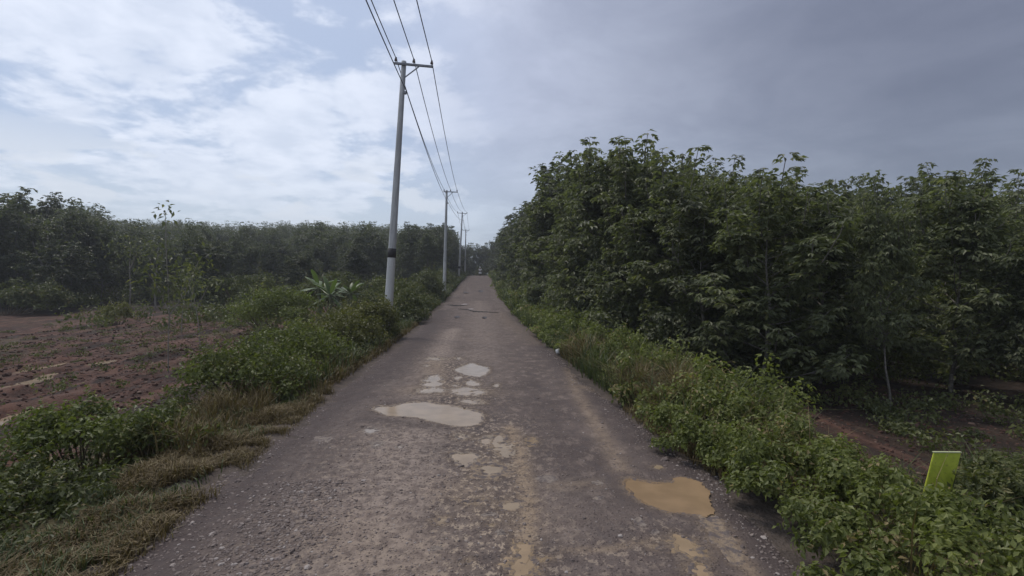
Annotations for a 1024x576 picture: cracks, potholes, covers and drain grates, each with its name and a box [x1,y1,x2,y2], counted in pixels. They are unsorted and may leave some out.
pothole [622,477,715,517]
pothole [448,451,481,468]
pothole [419,375,445,389]
pothole [371,401,485,427]
pothole [453,363,491,377]
pothole [496,499,527,511]
pothole [498,539,553,576]
pothole [486,432,516,458]
pothole [447,386,489,397]
pothole [664,534,711,561]
pothole [469,458,516,481]
pothole [415,386,447,394]
